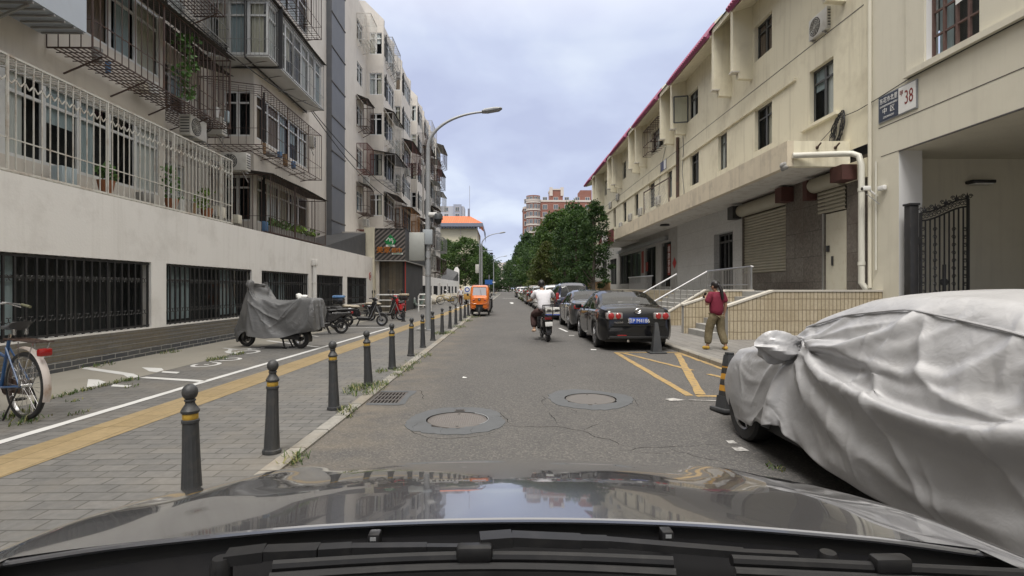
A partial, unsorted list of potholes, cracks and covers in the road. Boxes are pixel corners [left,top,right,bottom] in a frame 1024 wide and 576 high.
drain grate [365,391,416,405]
crack [408,396,617,452]
manhole cover [404,407,505,435]
manhole cover [548,389,634,410]
